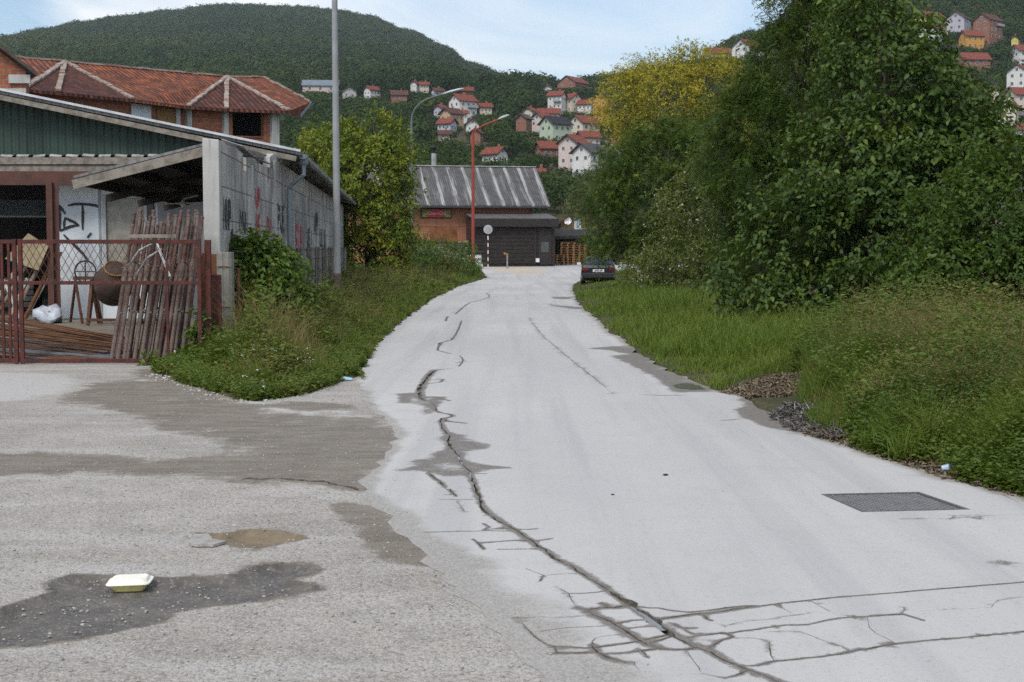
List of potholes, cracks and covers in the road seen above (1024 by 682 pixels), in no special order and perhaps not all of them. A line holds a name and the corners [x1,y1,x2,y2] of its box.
crack [417,296,1024,682]
pothole [196,529,308,548]
